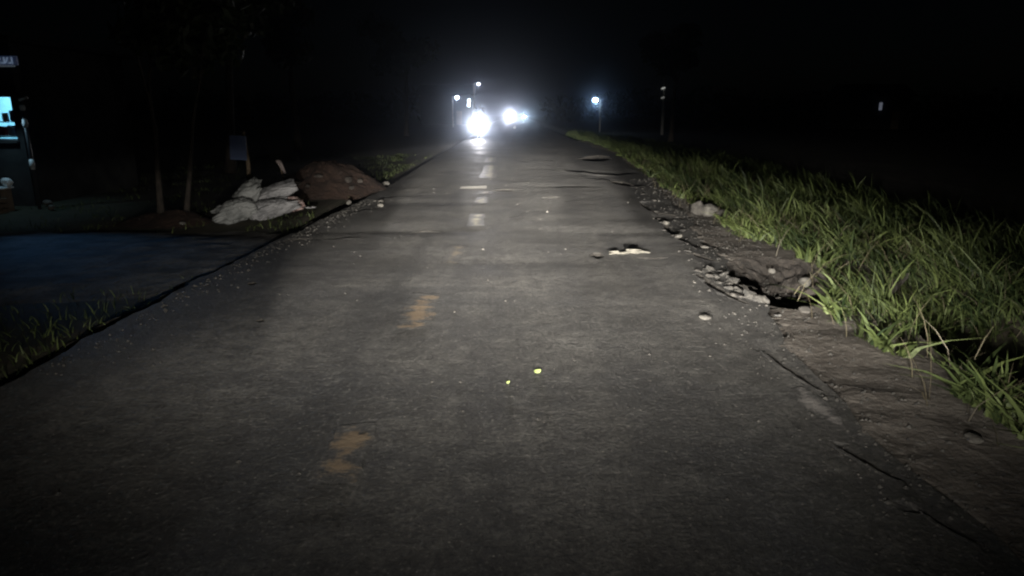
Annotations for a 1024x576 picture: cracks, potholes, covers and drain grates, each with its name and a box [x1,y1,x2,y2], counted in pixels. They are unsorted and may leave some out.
crack [830,443,900,481]
crack [919,510,978,546]
pothole [725,257,830,310]
crack [760,350,815,388]
